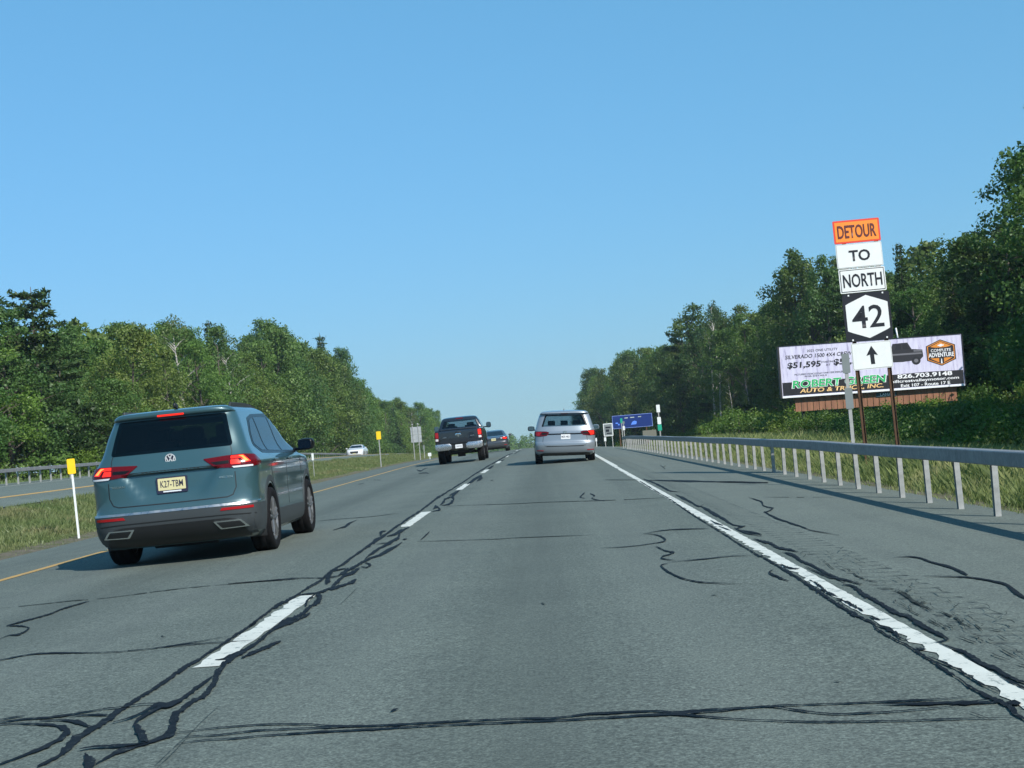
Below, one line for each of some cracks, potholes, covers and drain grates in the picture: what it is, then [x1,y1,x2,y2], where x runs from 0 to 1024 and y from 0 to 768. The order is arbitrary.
crack [749,497,837,535]
crack [0,634,254,660]
crack [5,577,333,608]
crack [420,531,597,541]
crack [801,547,1024,665]
